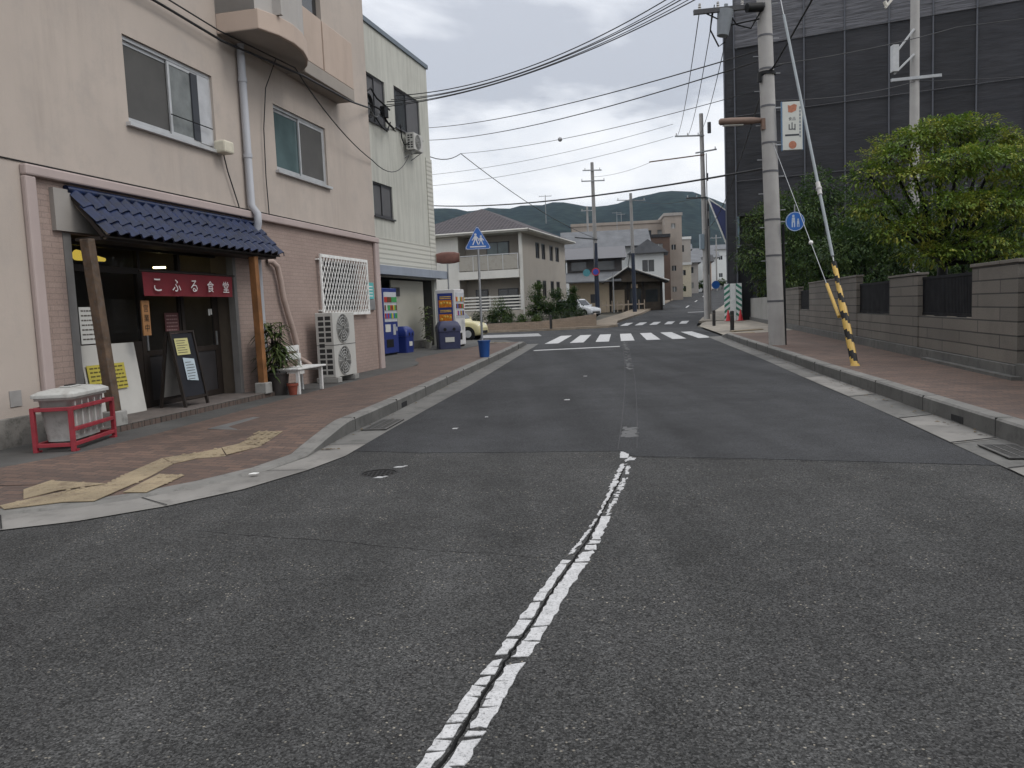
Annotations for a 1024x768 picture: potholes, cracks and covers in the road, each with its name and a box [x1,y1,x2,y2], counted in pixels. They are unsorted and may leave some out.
manhole cover [359,469,399,477]
drain grate [361,419,404,430]
drain grate [977,444,1024,459]
